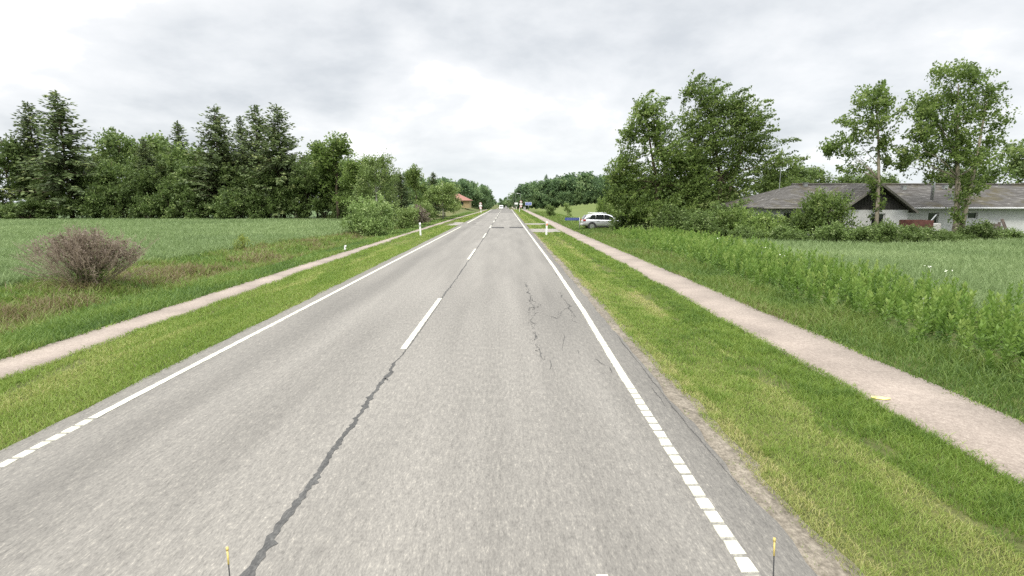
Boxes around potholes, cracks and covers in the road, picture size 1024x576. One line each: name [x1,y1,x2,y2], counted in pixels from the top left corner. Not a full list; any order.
crack [239,213,500,576]
crack [525,285,579,368]
